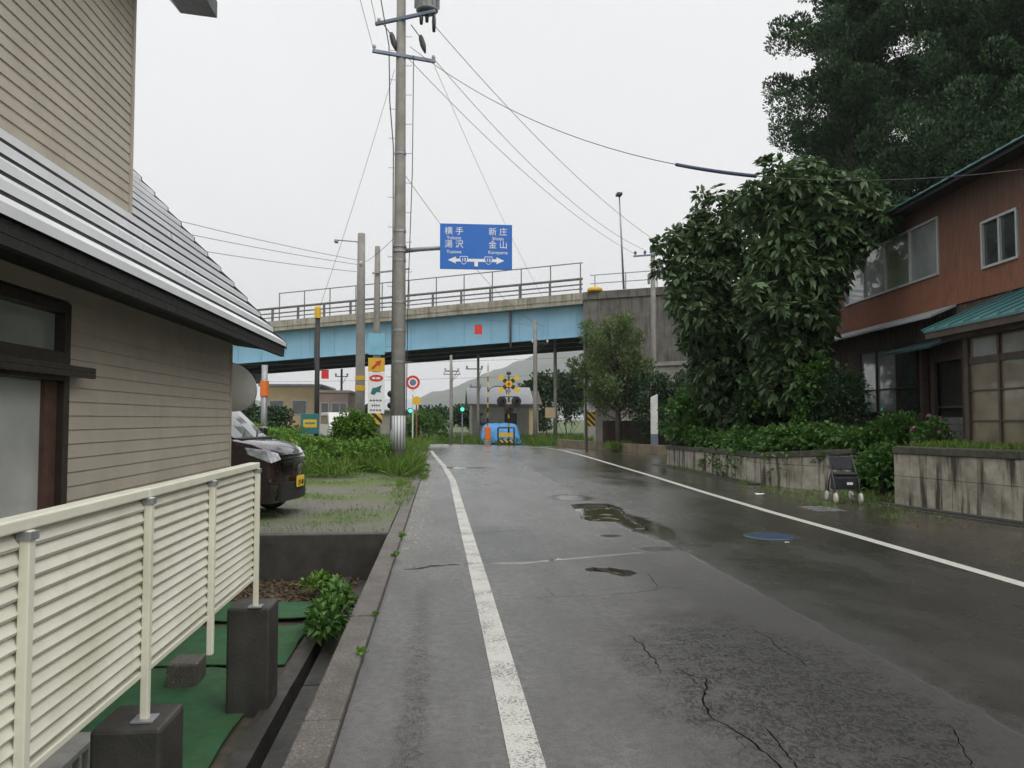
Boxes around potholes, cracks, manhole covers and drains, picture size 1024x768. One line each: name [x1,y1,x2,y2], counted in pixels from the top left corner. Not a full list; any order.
crack [525,575,708,600]
crack [951,727,974,768]
crack [679,640,928,768]
manhole cover [743,532,799,540]
pothole [585,567,636,577]
pothole [570,503,649,532]
crack [630,635,661,672]
